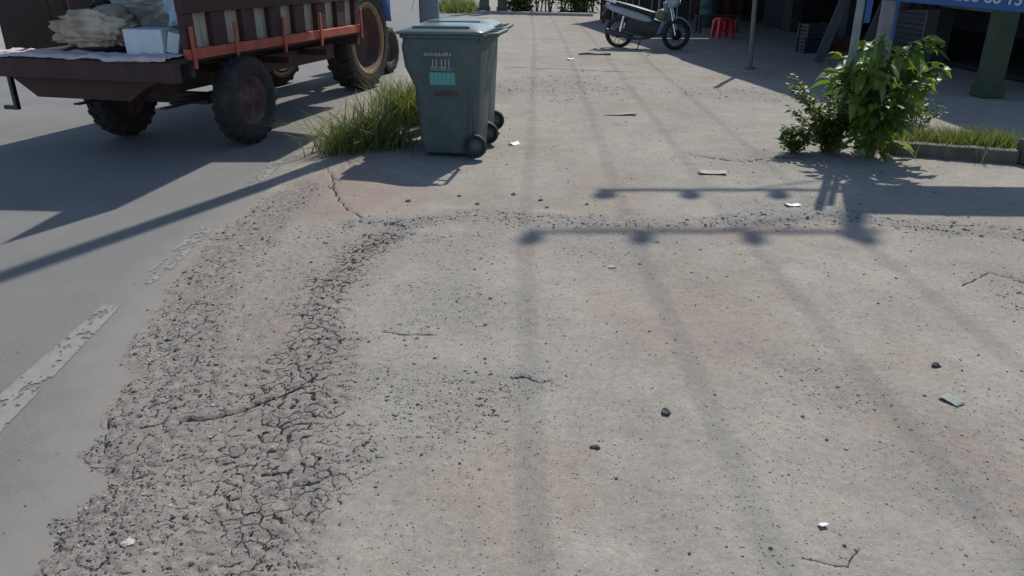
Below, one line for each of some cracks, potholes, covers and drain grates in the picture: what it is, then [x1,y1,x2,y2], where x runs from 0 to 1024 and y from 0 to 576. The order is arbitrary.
crack [40,302,245,576]
crack [165,232,405,576]
crack [802,549,860,567]
crack [328,172,364,219]
